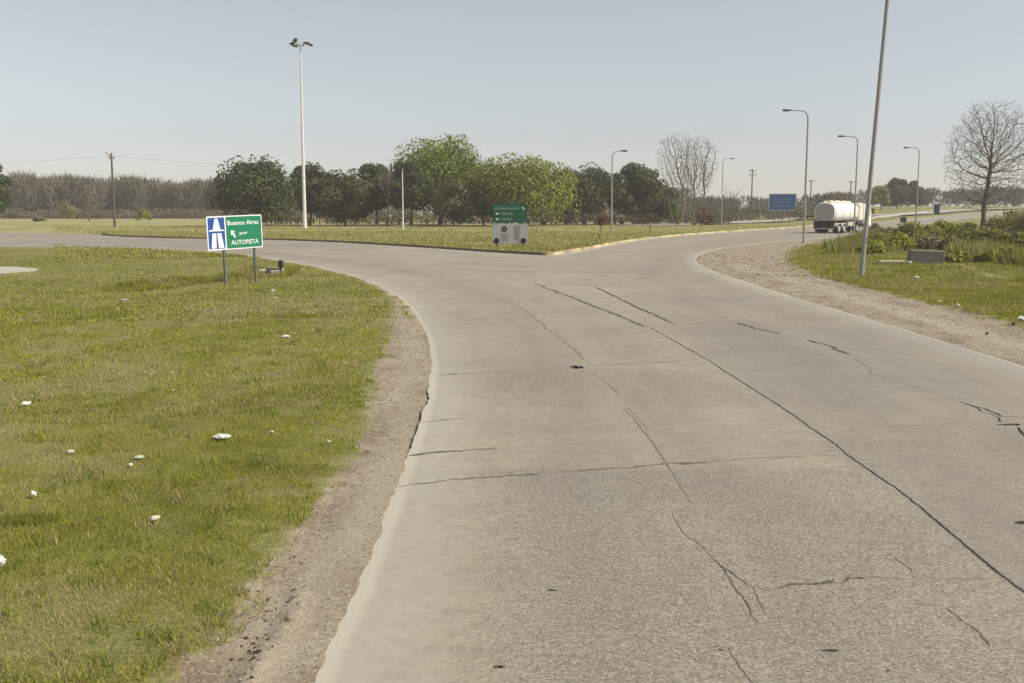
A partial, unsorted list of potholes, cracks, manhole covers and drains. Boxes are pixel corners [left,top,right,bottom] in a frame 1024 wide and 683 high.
crack [500,267,1001,623]
crack [947,608,992,652]
